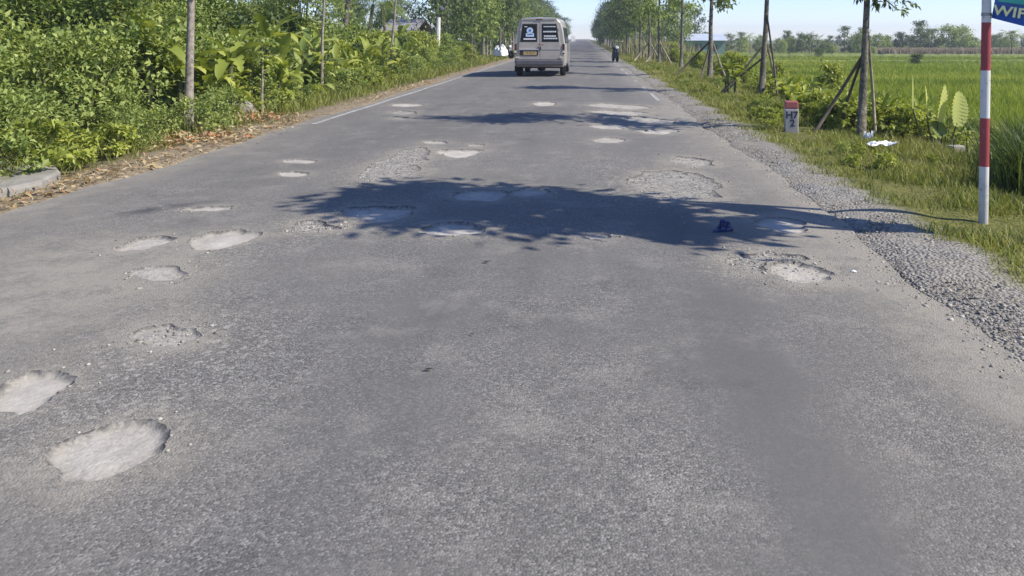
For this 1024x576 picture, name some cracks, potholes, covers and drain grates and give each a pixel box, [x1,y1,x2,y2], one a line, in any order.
pothole [752,216,808,234]
pothole [452,189,510,201]
pothole [510,187,551,197]
pothole [186,229,263,250]
pothole [127,323,202,347]
pothole [44,419,171,482]
pothole [127,265,189,282]
pothole [111,235,177,251]
pothole [0,370,77,415]
pothole [339,206,418,223]
pothole [417,221,486,236]
pothole [433,149,484,158]
